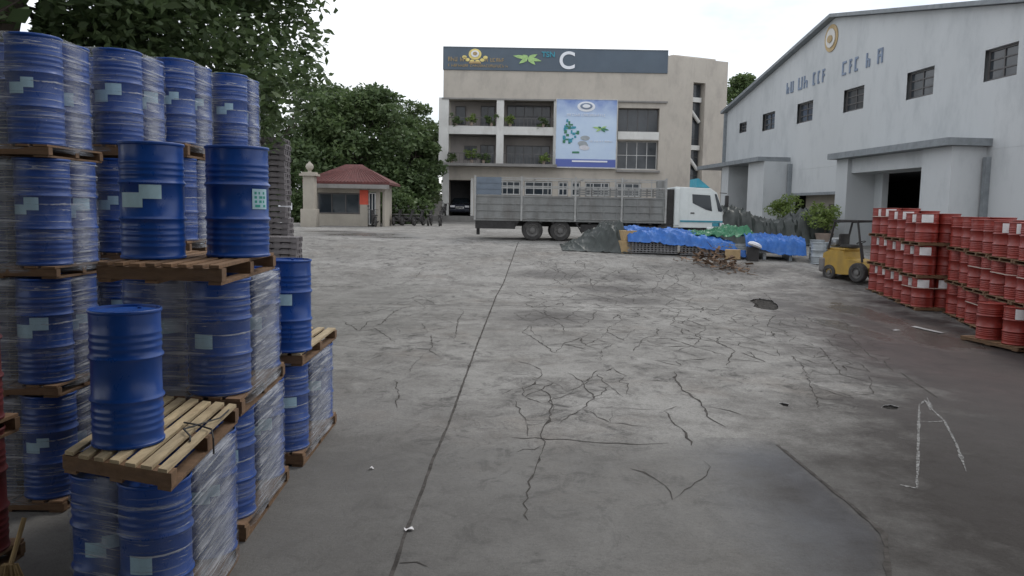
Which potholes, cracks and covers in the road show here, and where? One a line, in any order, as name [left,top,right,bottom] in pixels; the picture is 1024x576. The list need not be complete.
crack [505,260,893,520]
crack [332,295,456,374]
pothole [750,298,778,310]
